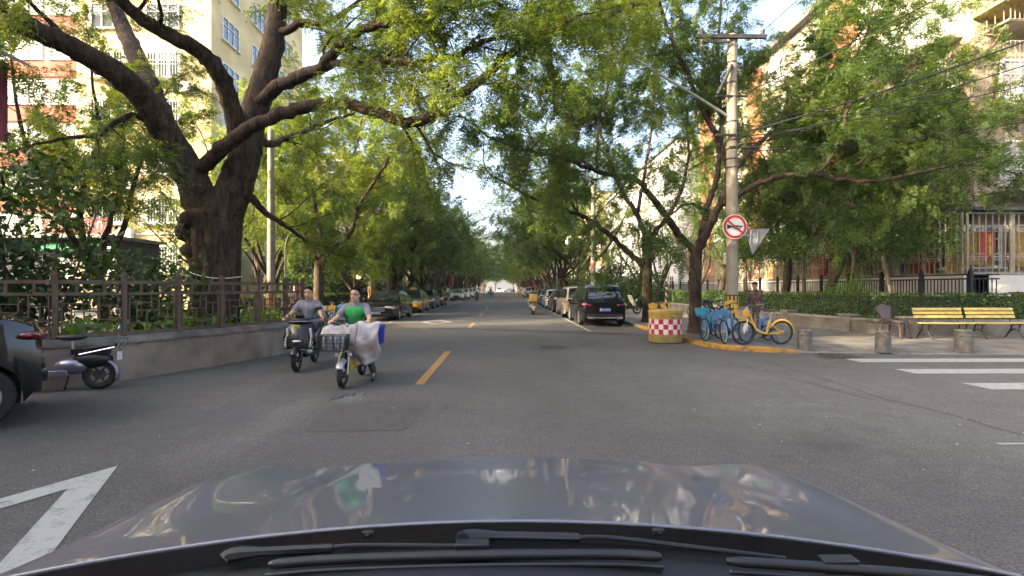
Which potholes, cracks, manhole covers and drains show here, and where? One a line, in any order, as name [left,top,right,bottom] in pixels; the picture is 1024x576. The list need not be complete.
pothole [330,392,369,403]
